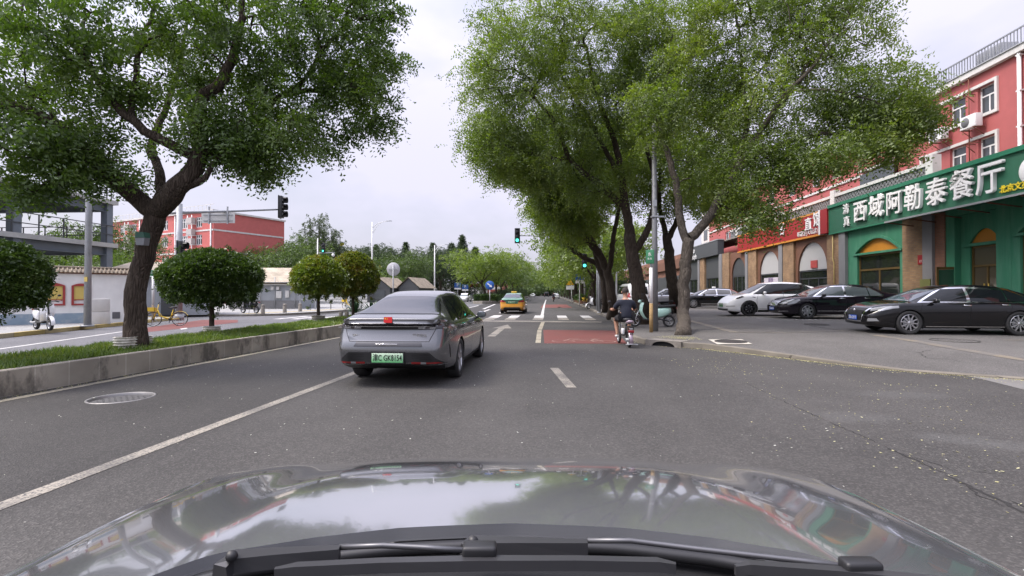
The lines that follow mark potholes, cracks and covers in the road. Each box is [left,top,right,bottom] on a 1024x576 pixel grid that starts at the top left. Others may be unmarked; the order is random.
manhole cover [84,392,156,404]
drain grate [645,338,688,348]
